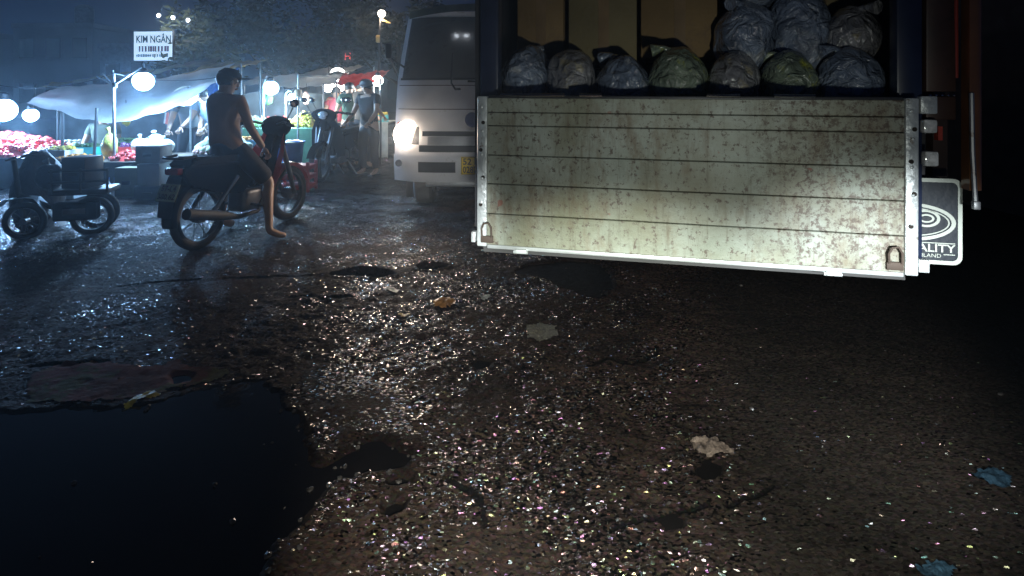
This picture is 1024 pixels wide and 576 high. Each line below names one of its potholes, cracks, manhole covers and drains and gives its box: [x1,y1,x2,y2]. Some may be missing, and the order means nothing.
pothole [694,460,729,480]
crack [120,278,202,287]
pothole [417,261,452,270]
crack [222,273,356,300]
crack [445,475,491,528]
pothole [0,377,419,576]
pothole [514,258,618,298]
pothole [325,266,398,278]
pothole [655,512,689,531]
crack [609,485,776,532]
